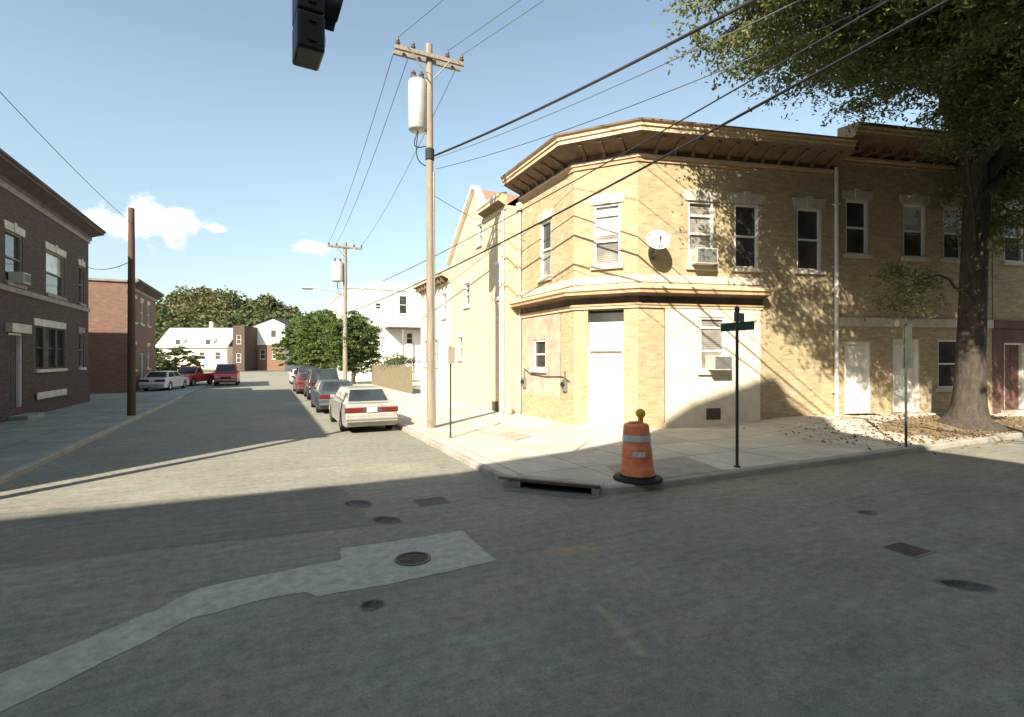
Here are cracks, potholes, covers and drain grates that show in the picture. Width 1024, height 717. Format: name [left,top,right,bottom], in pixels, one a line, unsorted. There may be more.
manhole cover [879,541,935,558]
manhole cover [394,551,431,566]
manhole cover [413,496,451,507]
drain grate [498,474,605,500]
